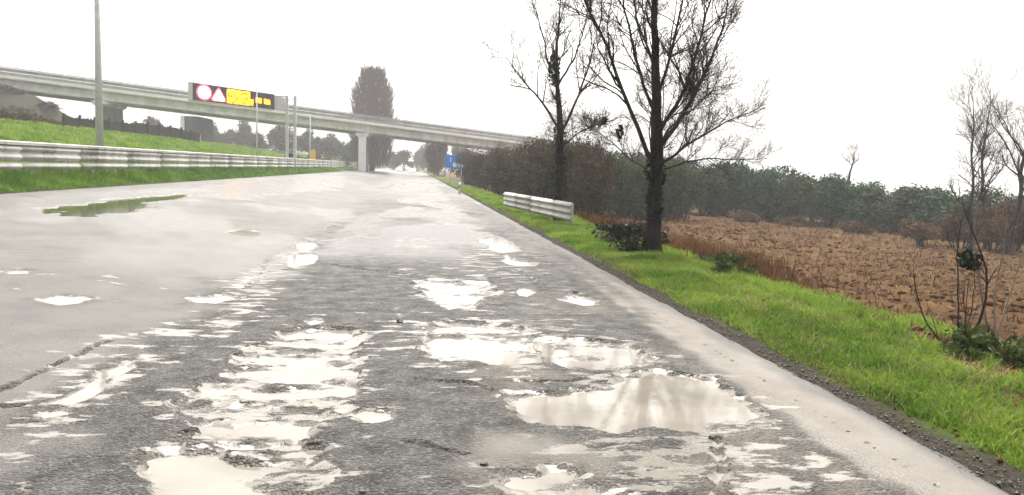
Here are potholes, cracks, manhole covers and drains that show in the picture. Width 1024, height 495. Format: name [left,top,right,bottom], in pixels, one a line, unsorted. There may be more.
pothole [487,463,642,495]
pothole [477,235,522,253]
pothole [347,406,402,423]
pothole [279,253,321,267]
pothole [533,336,660,373]
crack [0,340,114,408]
pothole [409,277,505,311]
pothole [555,292,602,306]
pothole [498,368,784,434]
pothole [28,294,96,306]
pothole [290,240,319,252]
pothole [120,438,342,495]
